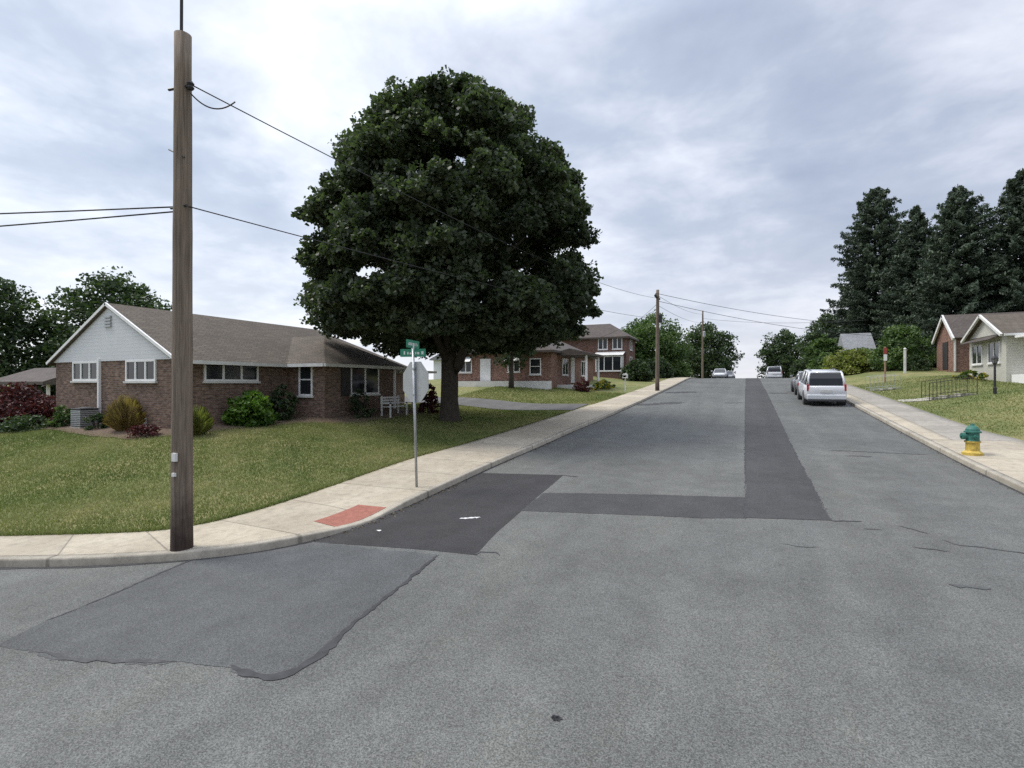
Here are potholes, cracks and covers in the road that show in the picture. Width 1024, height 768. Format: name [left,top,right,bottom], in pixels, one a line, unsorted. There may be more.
crack [831,520,1024,553]
